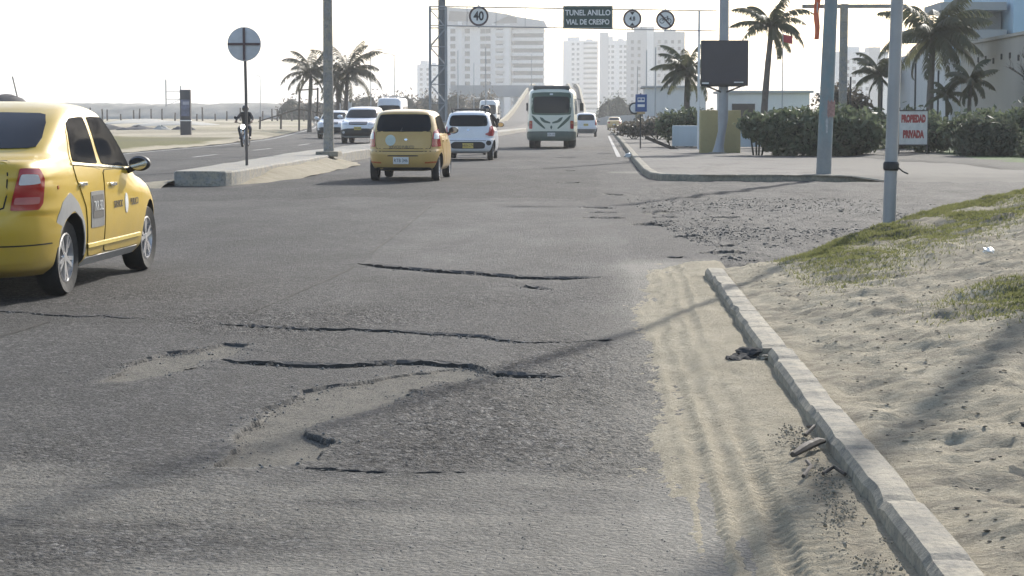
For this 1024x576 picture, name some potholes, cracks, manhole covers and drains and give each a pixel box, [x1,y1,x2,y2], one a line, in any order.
crack [0,310,144,337]
pothole [224,368,488,467]
pothole [108,345,243,382]
crack [358,263,600,290]
crack [109,323,612,420]
